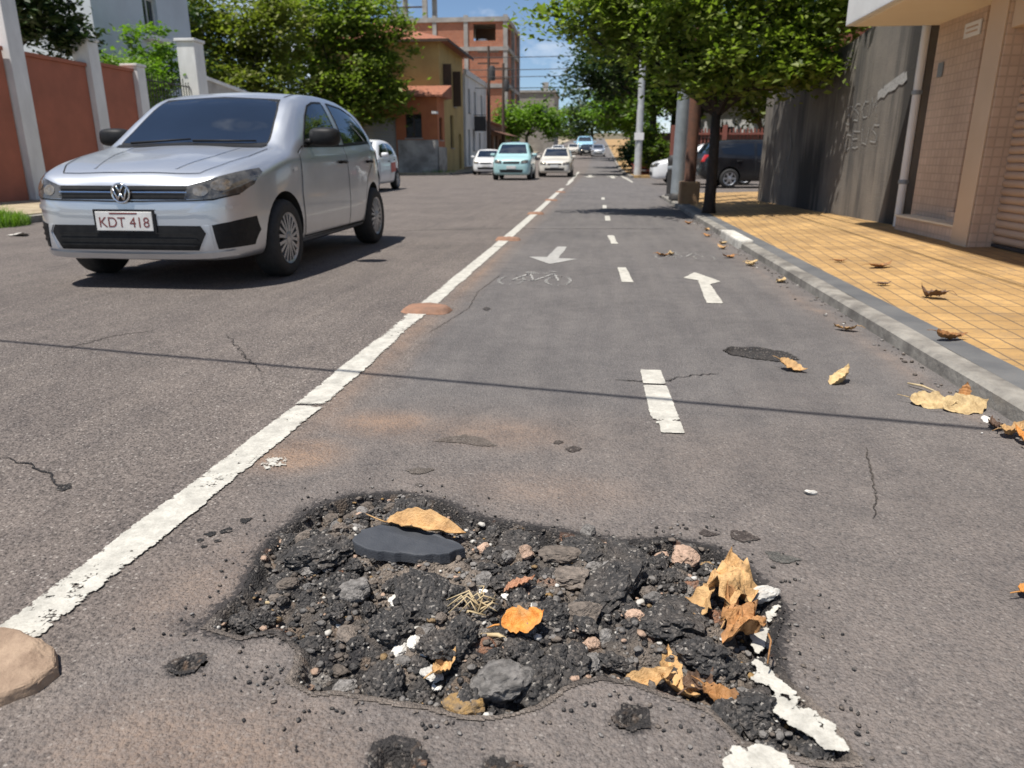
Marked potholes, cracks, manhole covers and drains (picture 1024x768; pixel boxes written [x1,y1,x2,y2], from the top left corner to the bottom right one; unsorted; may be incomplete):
crack [3,457,64,487]
crack [226,335,264,374]
pothole [200,492,865,768]
crack [866,447,878,518]
